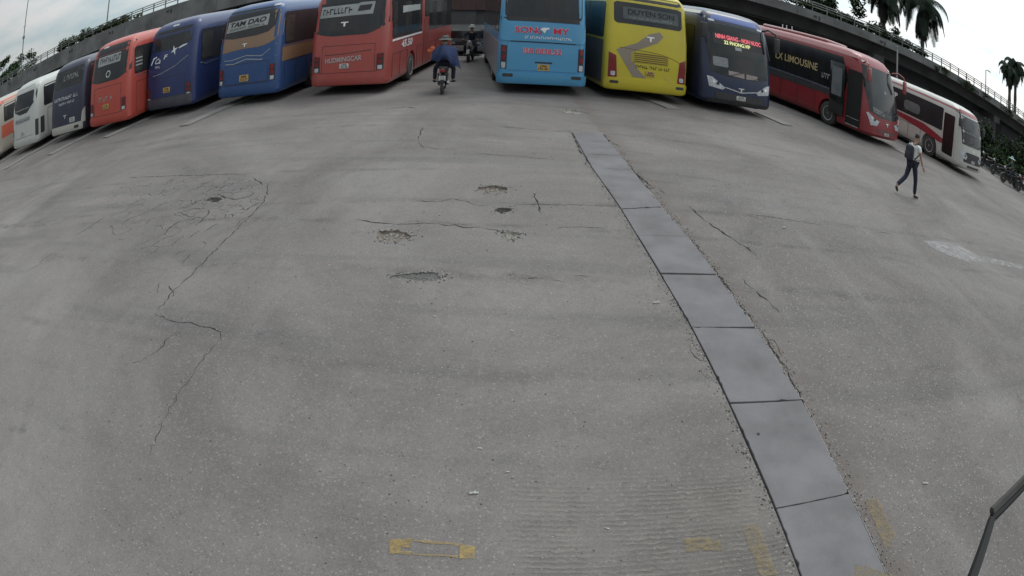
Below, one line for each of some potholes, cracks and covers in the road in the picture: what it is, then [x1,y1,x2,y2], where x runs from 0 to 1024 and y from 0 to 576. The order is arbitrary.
pothole [390,272,441,281]
pothole [377,230,412,243]
crack [518,194,599,212]
crack [689,206,806,404]
crack [357,219,502,233]
crack [82,174,269,455]
pothole [478,185,507,193]
